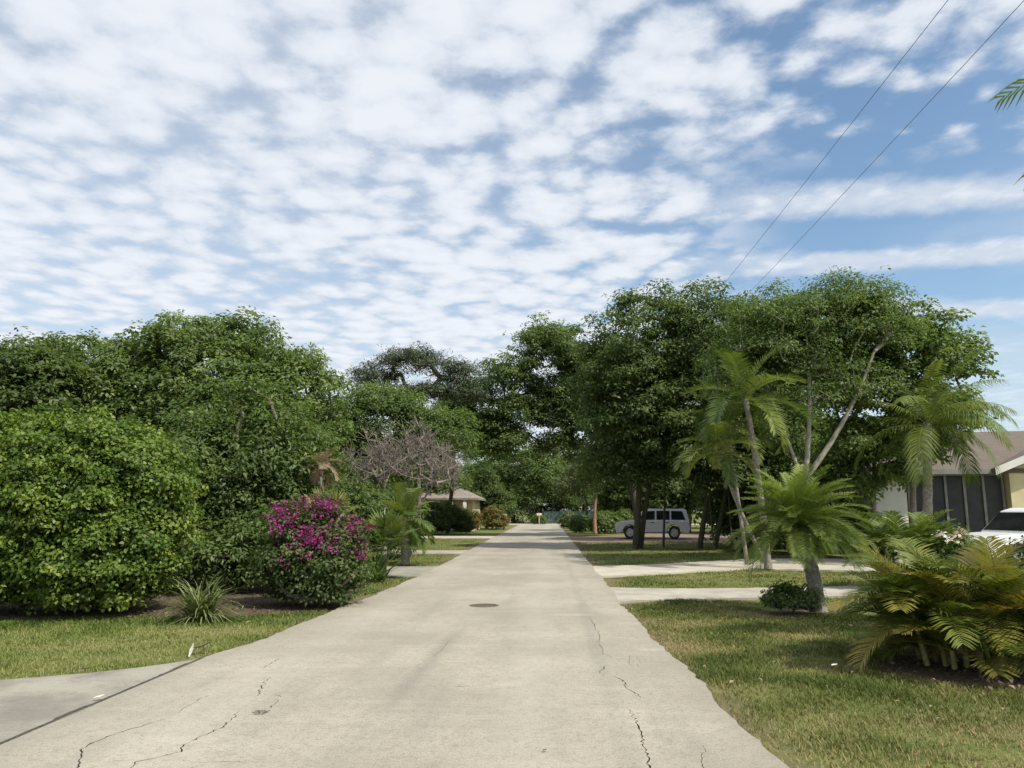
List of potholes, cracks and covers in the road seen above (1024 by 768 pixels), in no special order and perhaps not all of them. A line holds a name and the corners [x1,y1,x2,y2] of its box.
crack [591,621,651,768]
crack [76,692,240,768]
